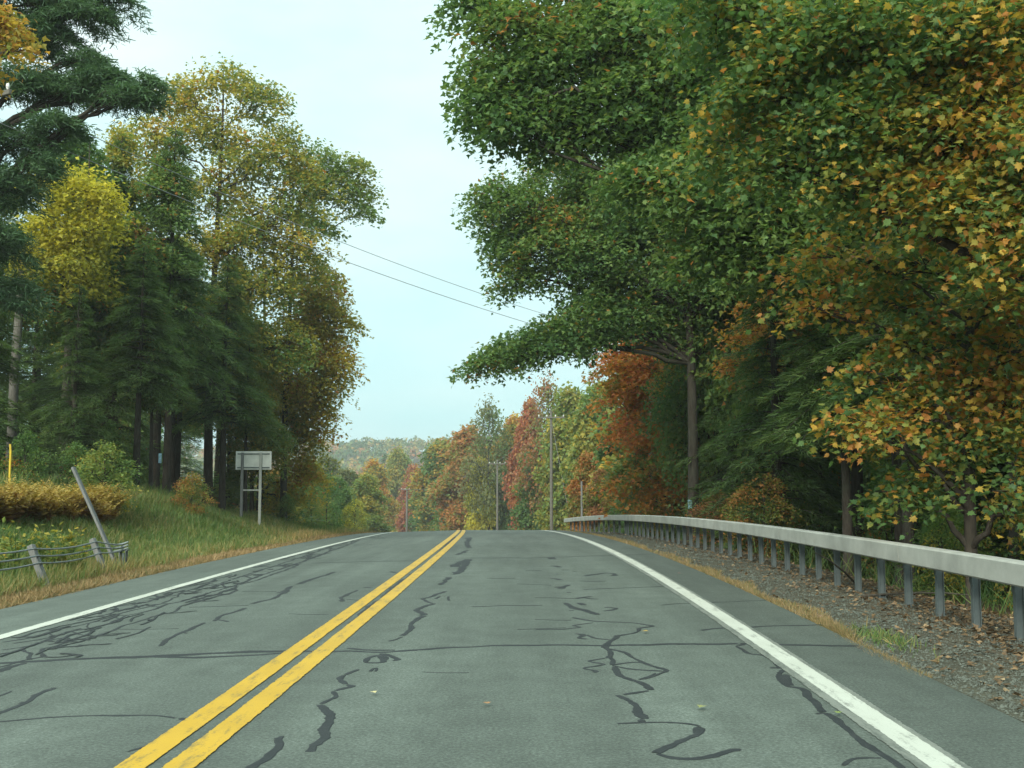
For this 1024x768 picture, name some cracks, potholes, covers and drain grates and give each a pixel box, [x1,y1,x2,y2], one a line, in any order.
crack [0,536,859,672]
crack [842,757,881,766]
